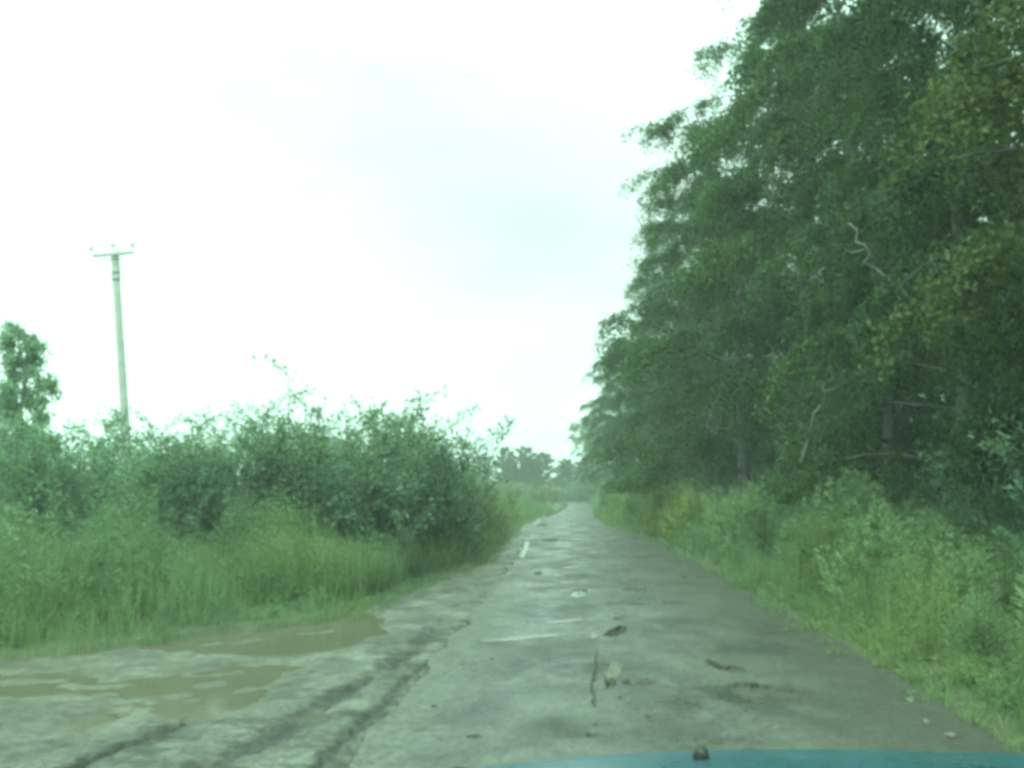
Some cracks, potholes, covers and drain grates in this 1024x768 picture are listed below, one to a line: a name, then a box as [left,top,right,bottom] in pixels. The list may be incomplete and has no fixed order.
pothole [603,625,627,638]
pothole [725,681,817,699]
crack [589,650,609,708]
pothole [603,660,622,689]
pothole [704,659,746,673]
pothole [569,589,588,597]
